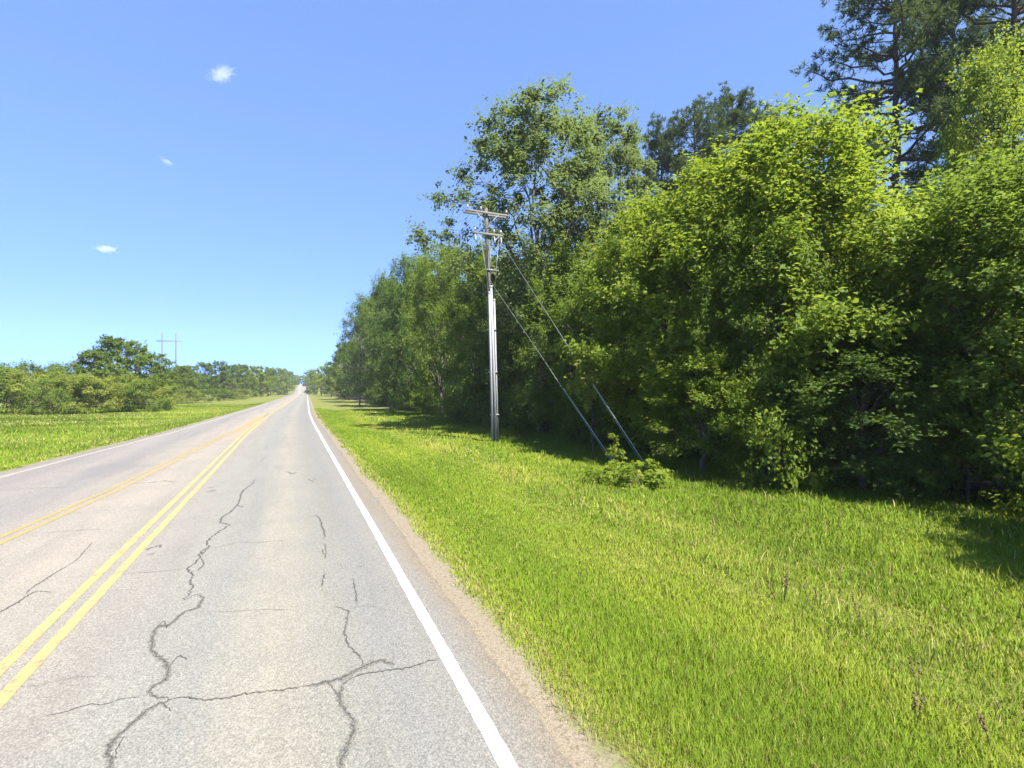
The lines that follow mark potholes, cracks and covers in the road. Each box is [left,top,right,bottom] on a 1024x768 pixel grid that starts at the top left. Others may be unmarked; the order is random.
crack [50,472,437,768]
crack [0,529,90,612]
